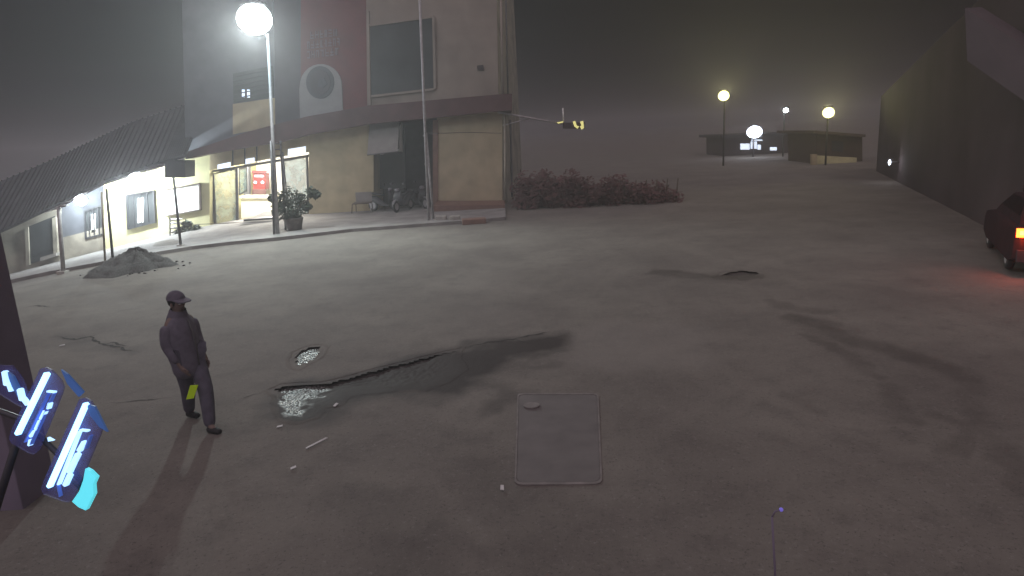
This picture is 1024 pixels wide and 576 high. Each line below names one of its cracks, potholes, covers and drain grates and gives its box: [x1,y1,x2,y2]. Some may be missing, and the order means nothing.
manhole cover [515,393,602,486]
crack [62,335,133,351]
pothole [712,269,766,282]
pothole [263,346,469,425]
